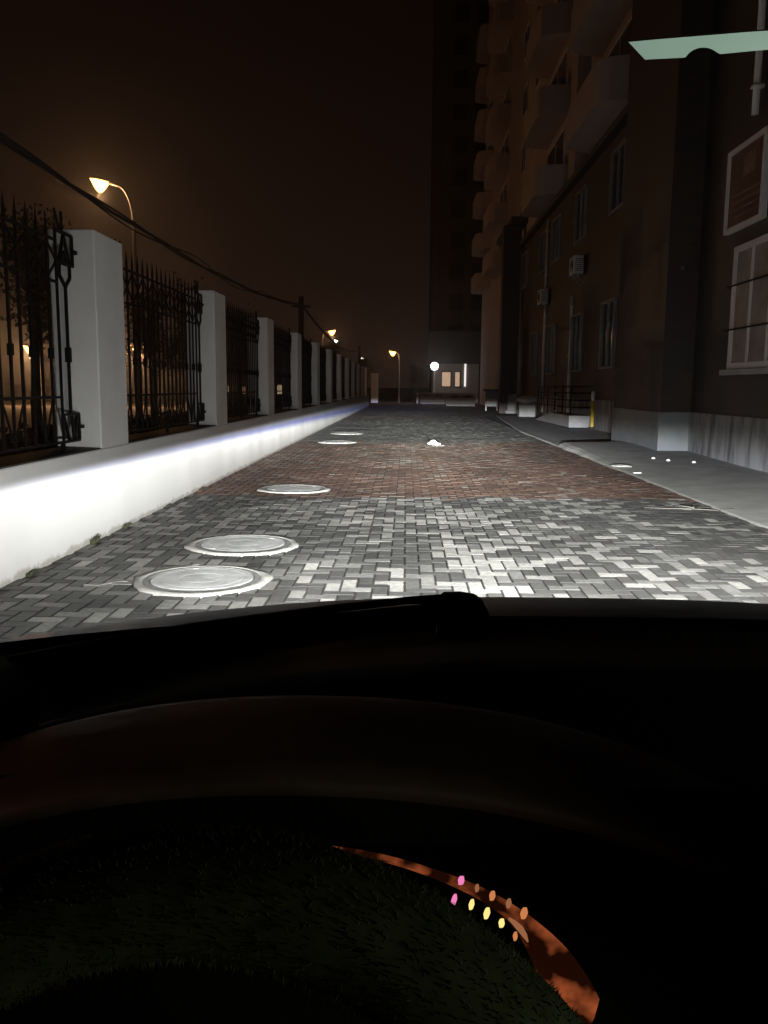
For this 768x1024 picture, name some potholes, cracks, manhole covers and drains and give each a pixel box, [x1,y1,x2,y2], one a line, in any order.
manhole cover [133,565,273,599]
manhole cover [257,484,331,494]
manhole cover [184,534,299,557]
